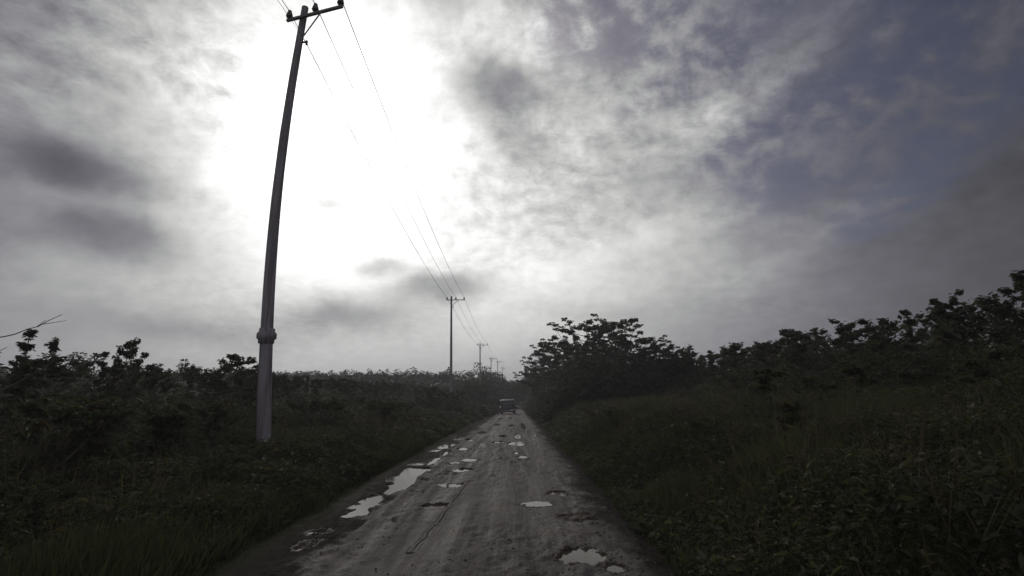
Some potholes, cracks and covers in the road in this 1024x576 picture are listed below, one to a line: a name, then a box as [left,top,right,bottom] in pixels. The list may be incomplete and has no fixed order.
pothole [552,544,614,568]
crack [406,480,473,554]
pothole [601,561,630,574]
pothole [417,501,455,510]
